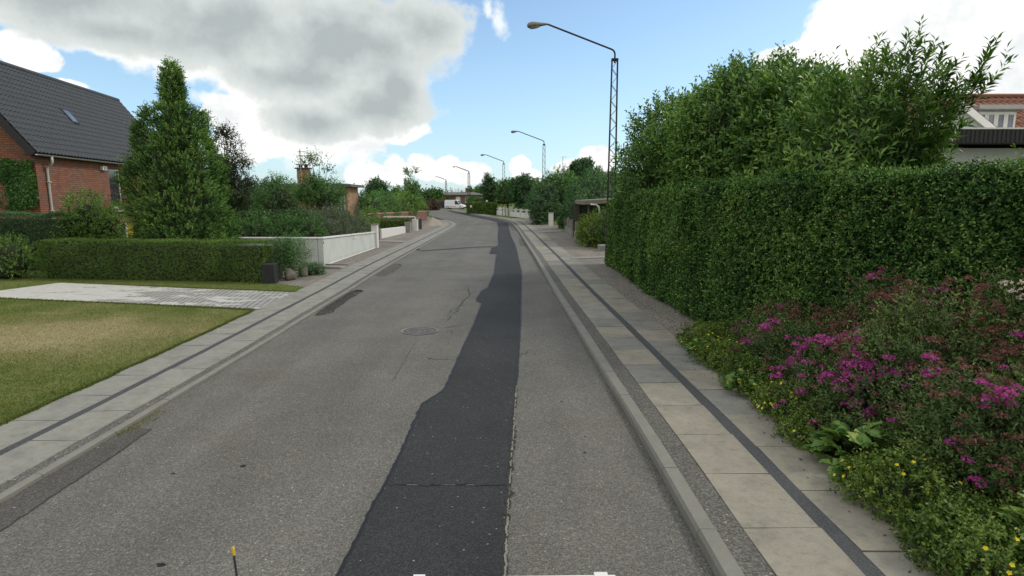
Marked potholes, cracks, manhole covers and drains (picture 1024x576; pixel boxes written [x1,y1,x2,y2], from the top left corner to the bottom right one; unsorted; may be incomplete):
manhole cover [401,327,439,335]
